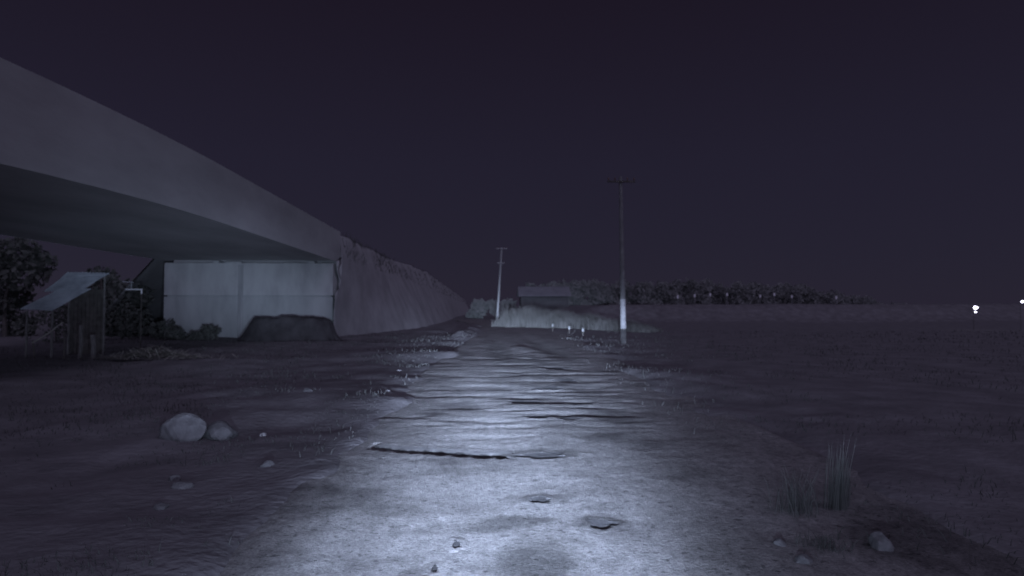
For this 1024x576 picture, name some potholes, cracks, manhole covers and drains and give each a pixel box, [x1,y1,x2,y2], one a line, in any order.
pothole [575,516,630,533]
pothole [519,493,560,506]
crack [369,441,513,461]
